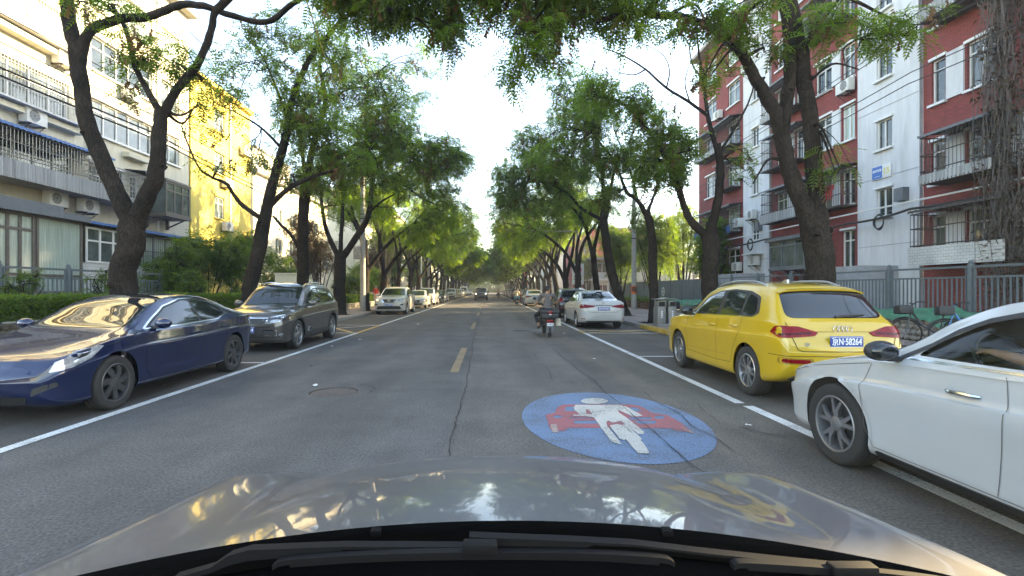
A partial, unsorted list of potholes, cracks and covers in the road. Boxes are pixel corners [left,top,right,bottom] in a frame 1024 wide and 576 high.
manhole cover [308,387,359,397]
crack [643,391,790,452]
